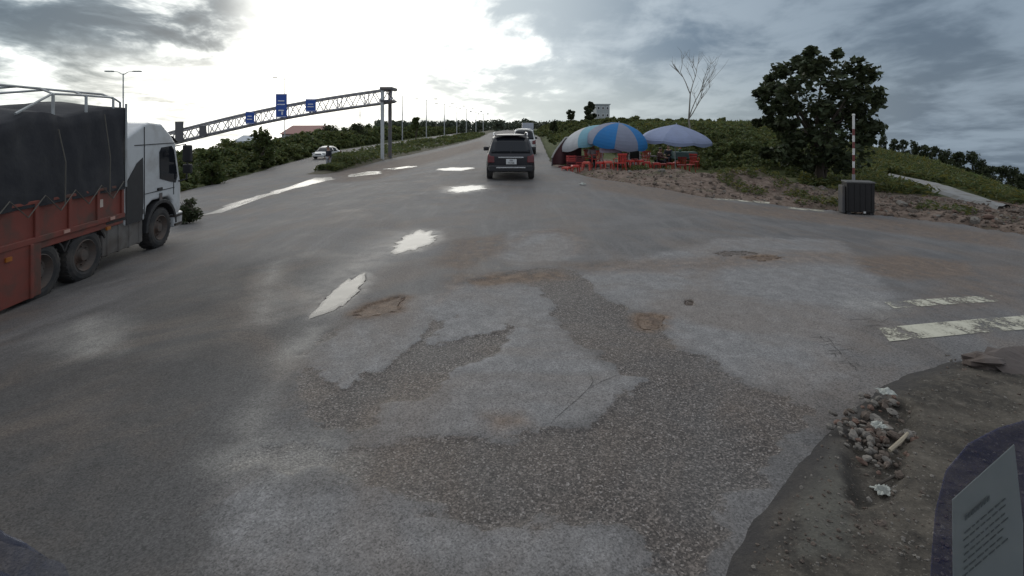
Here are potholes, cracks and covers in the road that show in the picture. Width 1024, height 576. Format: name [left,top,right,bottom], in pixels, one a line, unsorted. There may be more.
crack [820,317,898,368]
pothole [638,315,665,330]
pothole [353,296,405,316]
